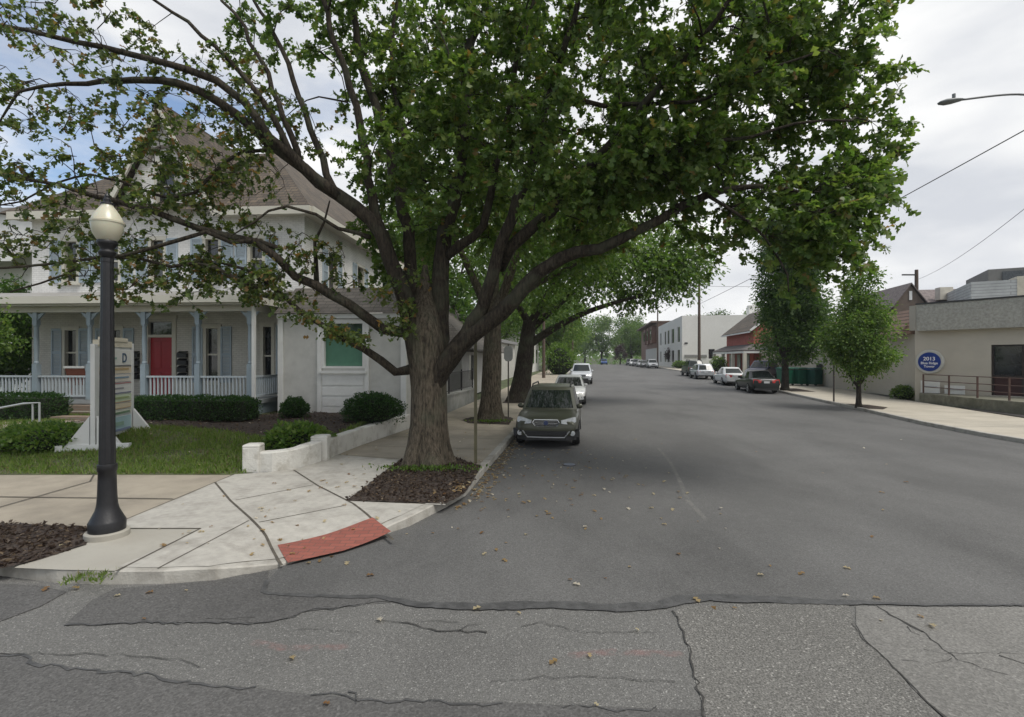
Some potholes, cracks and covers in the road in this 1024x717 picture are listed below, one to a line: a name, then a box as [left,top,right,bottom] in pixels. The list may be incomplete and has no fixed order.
crack [2,652,199,667]
crack [851,604,1022,717]
crack [493,610,705,717]
